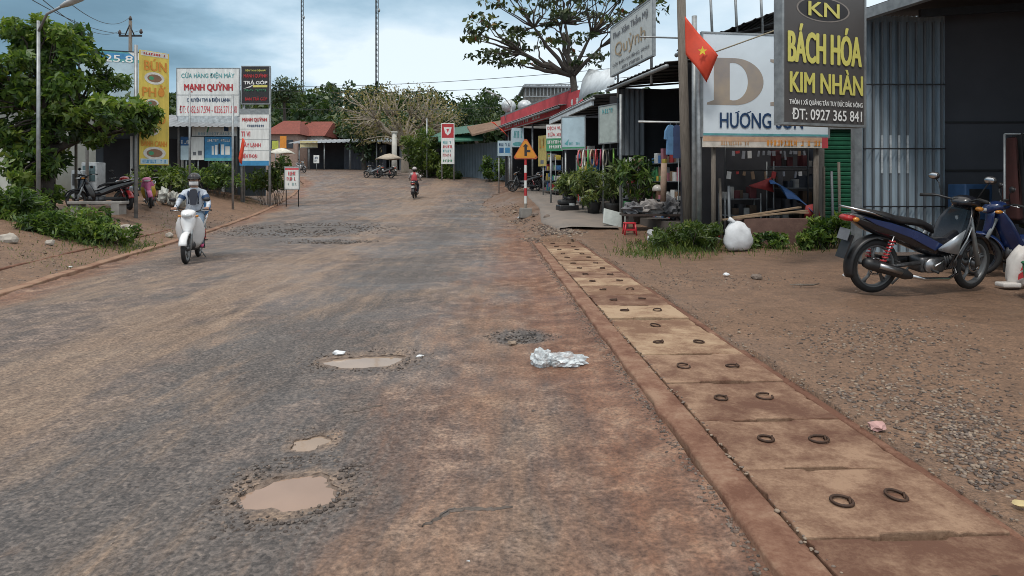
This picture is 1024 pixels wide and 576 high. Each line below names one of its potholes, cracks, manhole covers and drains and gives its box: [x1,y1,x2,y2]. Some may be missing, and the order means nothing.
crack [421,505,513,527]
pothole [289,435,333,451]
pothole [230,472,342,512]
pothole [504,334,537,343]
pothole [316,355,406,368]
